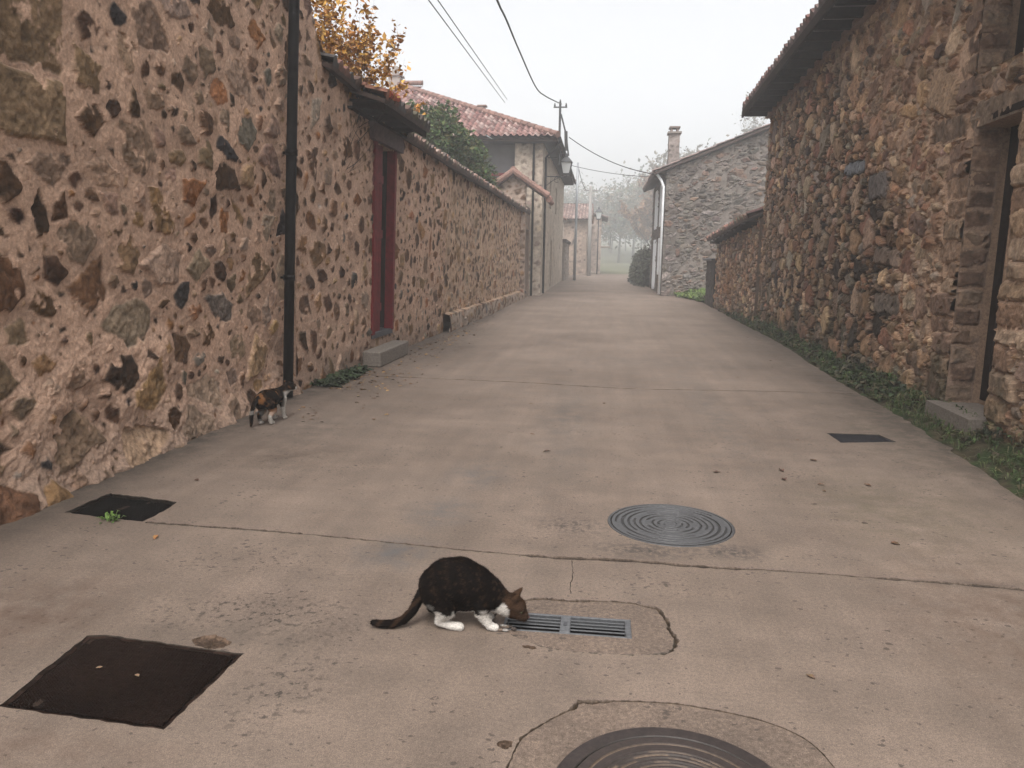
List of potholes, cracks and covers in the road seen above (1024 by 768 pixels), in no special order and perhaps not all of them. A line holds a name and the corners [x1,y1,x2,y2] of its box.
crack [147,521,1024,656]
manhole cover [0,635,244,730]
manhole cover [67,493,176,523]
drain grate [503,613,632,639]
manhole cover [607,504,735,547]
manhole cover [557,727,772,768]
